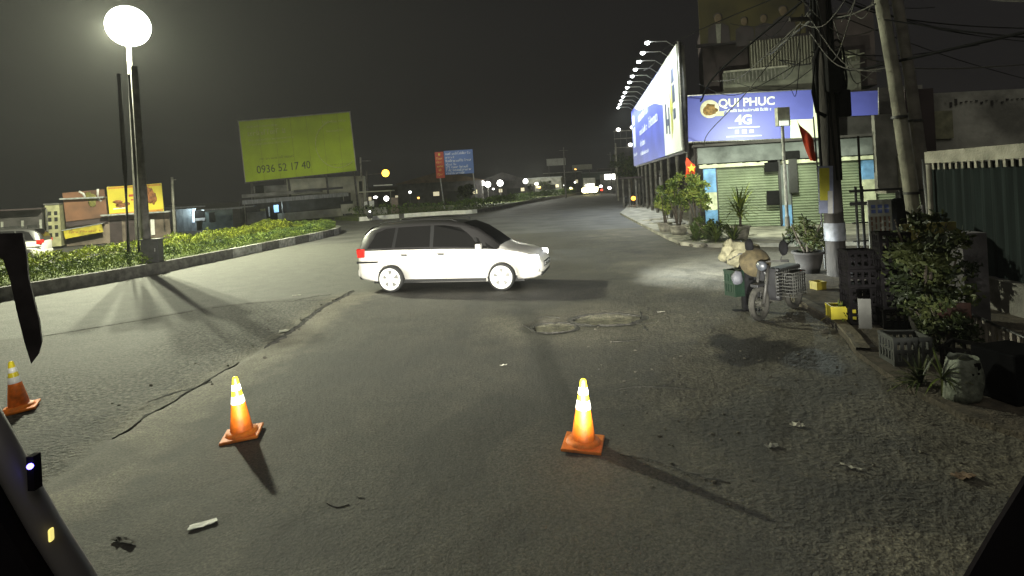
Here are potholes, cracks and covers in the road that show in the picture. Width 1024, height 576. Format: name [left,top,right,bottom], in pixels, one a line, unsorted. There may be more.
crack [214,290,355,348]
